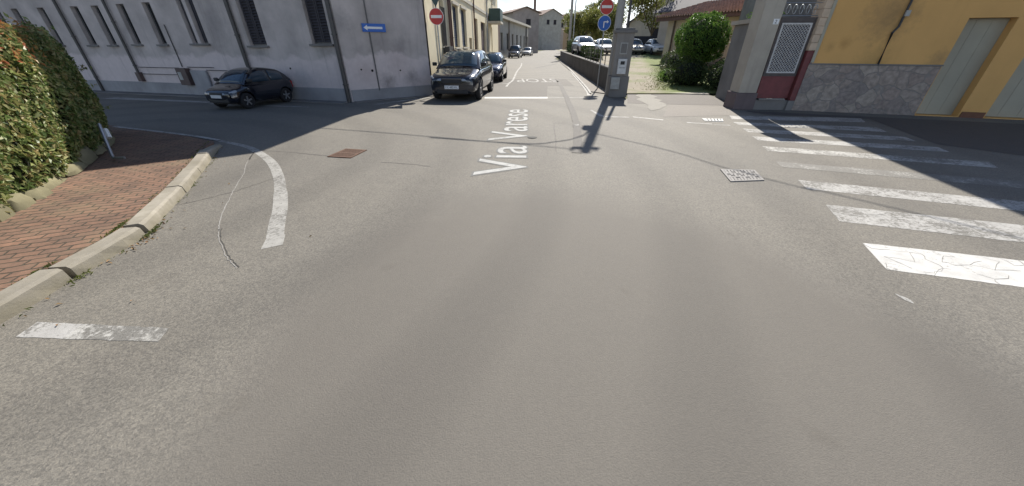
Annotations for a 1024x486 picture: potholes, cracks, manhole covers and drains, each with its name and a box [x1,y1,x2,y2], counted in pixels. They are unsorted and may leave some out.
drain grate [720,169,764,182]
crack [176,150,327,267]
drain grate [327,148,367,158]
